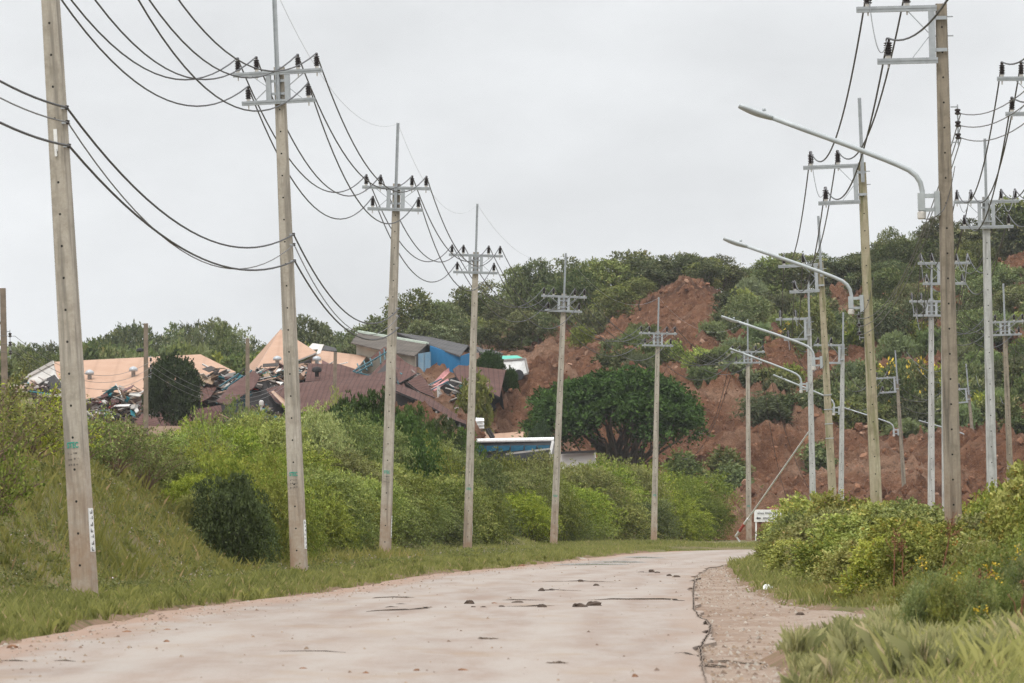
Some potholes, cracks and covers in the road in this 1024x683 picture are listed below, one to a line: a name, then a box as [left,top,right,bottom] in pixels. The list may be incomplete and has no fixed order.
crack [366,596,431,612]
